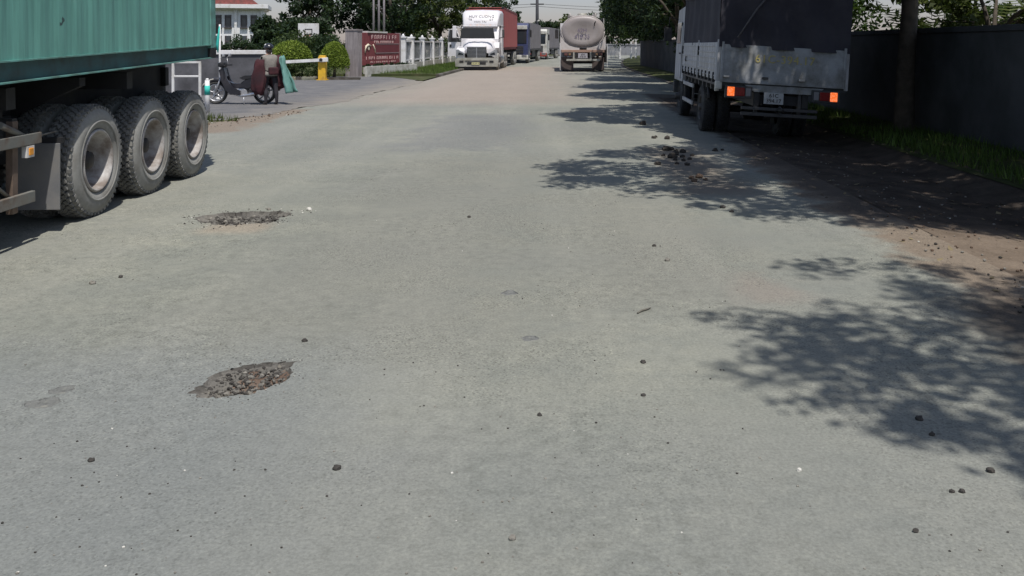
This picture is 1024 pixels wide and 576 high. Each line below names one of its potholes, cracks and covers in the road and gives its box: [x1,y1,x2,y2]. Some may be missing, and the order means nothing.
pothole [173,356,311,407]
pothole [179,208,312,229]
